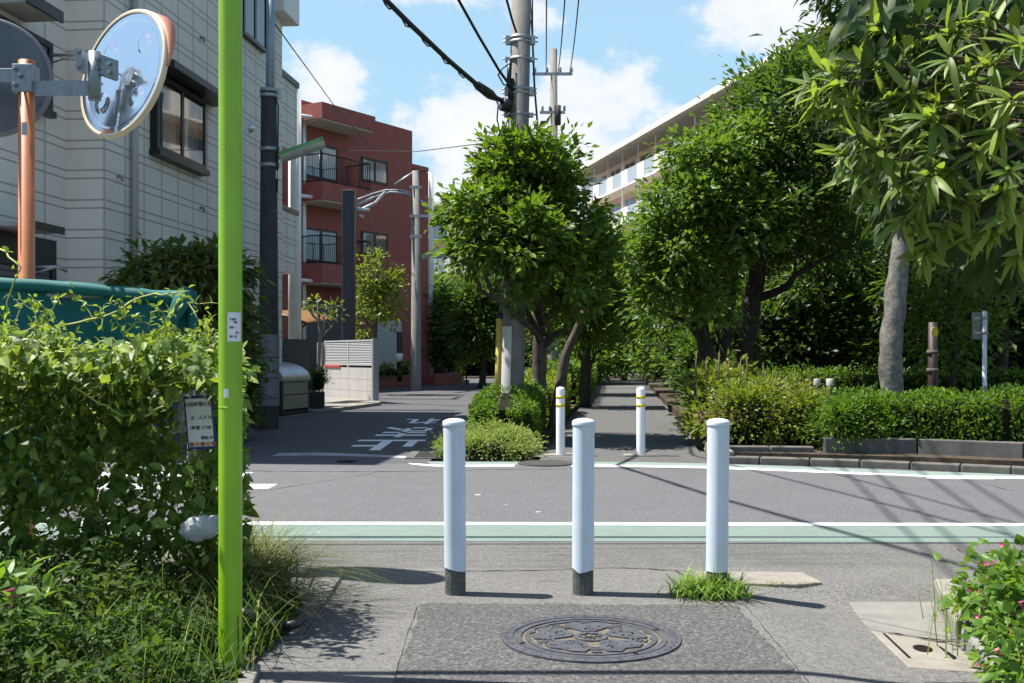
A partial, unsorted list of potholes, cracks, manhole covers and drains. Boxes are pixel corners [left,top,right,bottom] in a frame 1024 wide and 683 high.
manhole cover [502,614,681,664]
